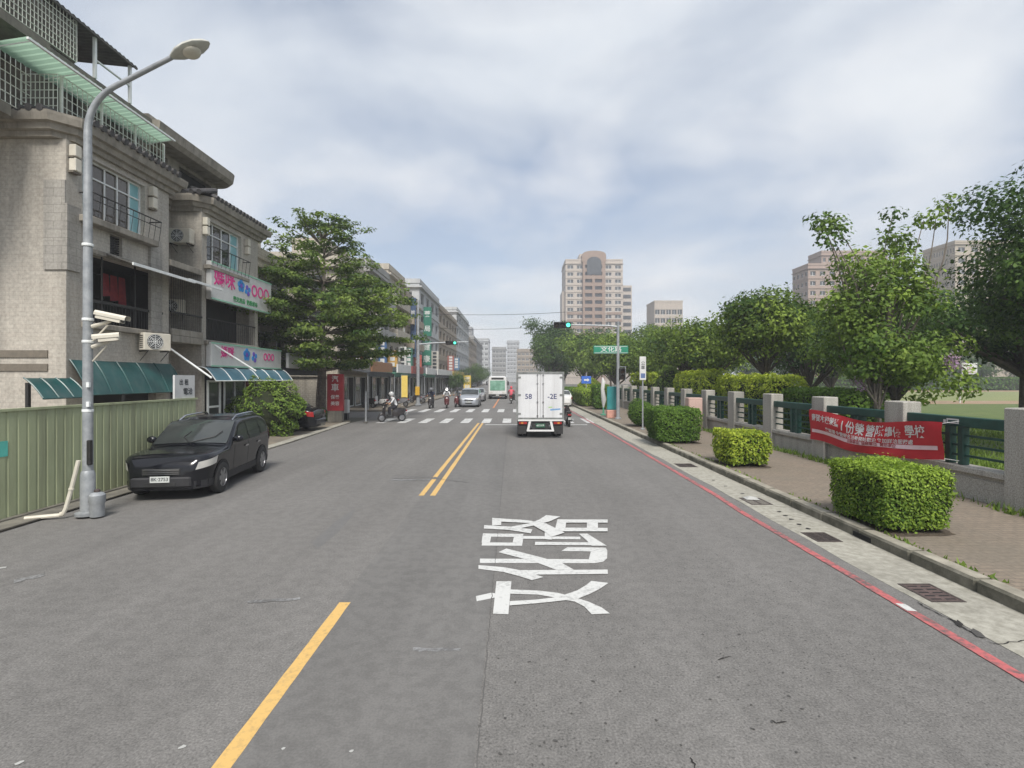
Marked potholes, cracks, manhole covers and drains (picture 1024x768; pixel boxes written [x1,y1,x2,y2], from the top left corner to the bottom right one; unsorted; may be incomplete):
crack [918,602,1024,644]
